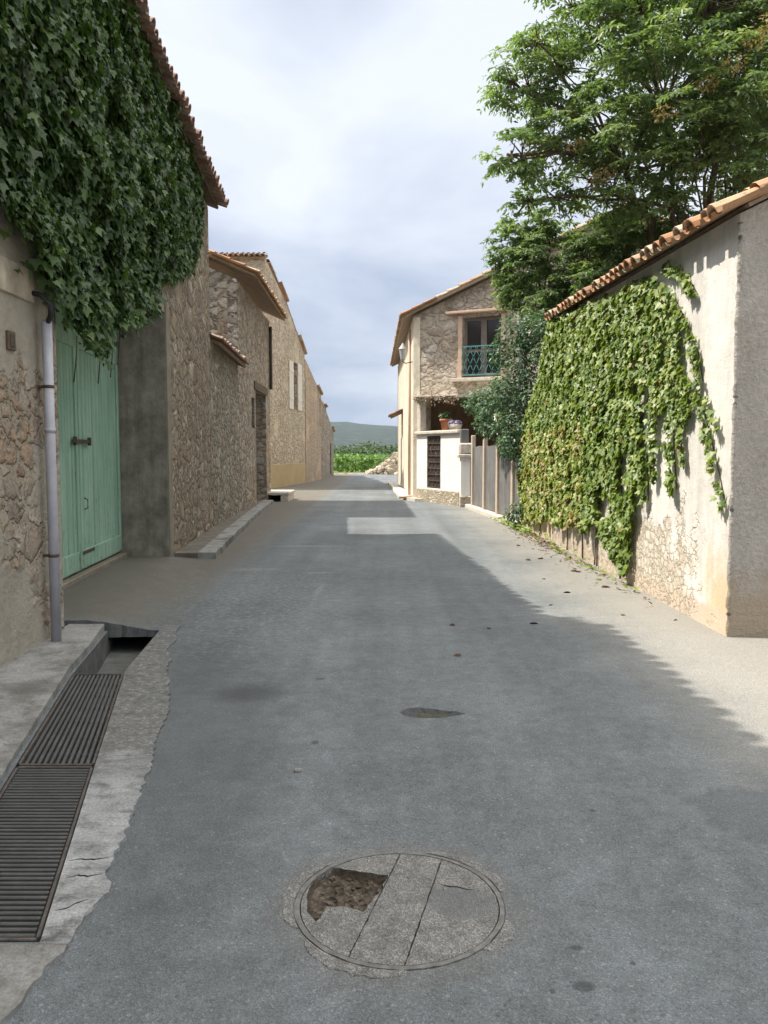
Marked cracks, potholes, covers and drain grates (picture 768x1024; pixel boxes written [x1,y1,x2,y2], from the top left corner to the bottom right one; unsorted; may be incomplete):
drain grate [18,674,123,770]
pothole [400,707,466,718]
drain grate [0,766,93,942]
crack [64,857,108,879]
manhole cover [281,851,515,980]
